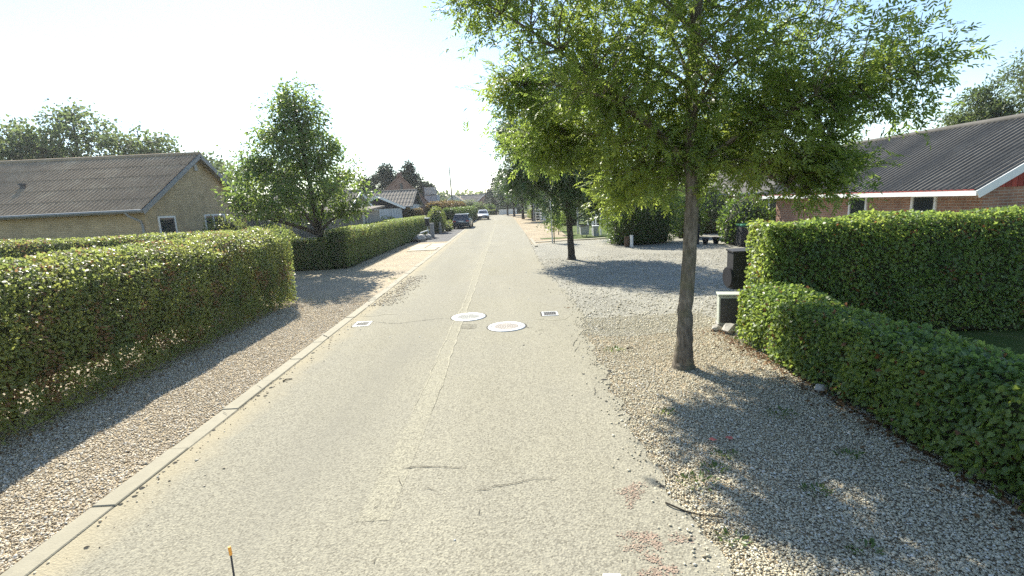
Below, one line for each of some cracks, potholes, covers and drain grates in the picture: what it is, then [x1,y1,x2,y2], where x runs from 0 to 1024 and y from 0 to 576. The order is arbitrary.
manhole cover [486,321,527,332]
manhole cover [450,313,487,321]
